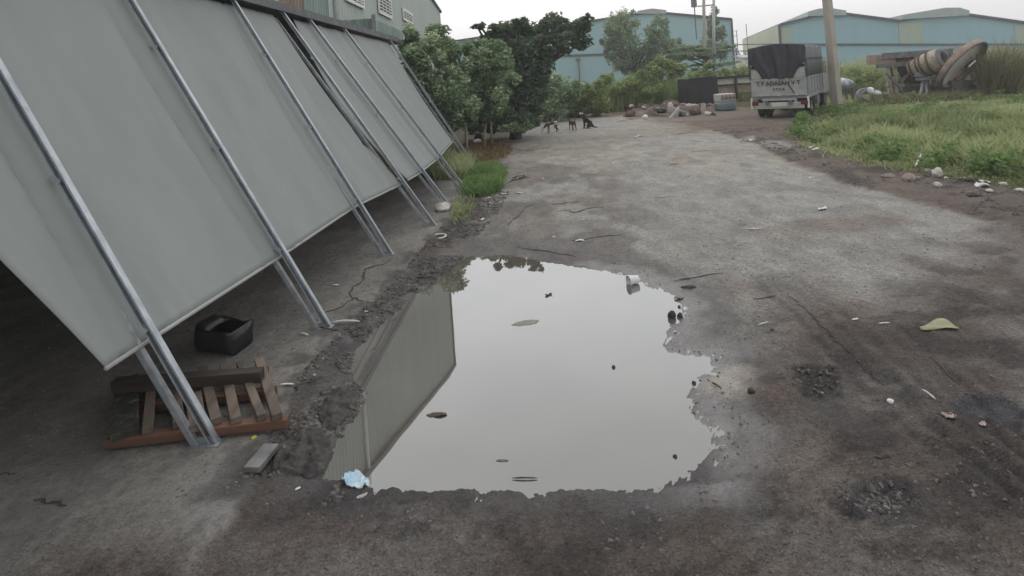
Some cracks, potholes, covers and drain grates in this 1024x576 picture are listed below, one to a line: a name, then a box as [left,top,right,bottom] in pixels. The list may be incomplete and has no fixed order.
pothole [792,363,842,400]
pothole [310,252,726,502]
crack [756,295,883,385]
pothole [837,475,925,521]
crack [321,259,390,330]
